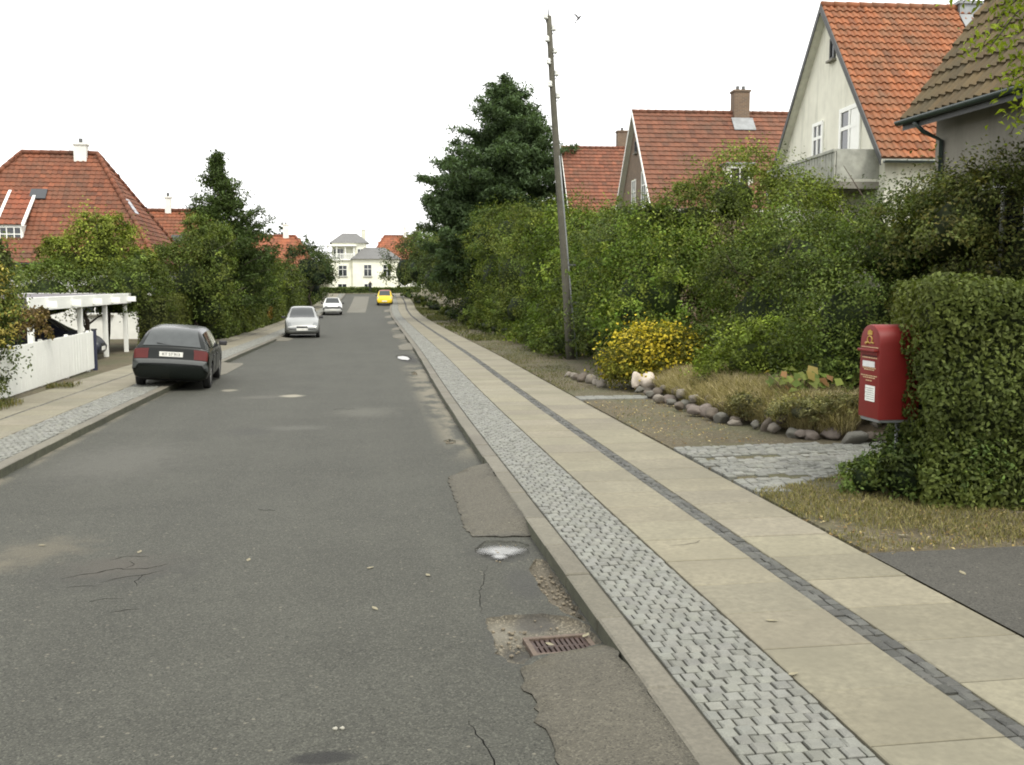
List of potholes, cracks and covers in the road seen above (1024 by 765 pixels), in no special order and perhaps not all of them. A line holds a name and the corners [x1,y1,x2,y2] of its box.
pothole [486,613,601,664]
pothole [529,559,587,623]
crack [469,724,495,765]
pothole [474,540,530,563]
crack [62,556,165,613]
